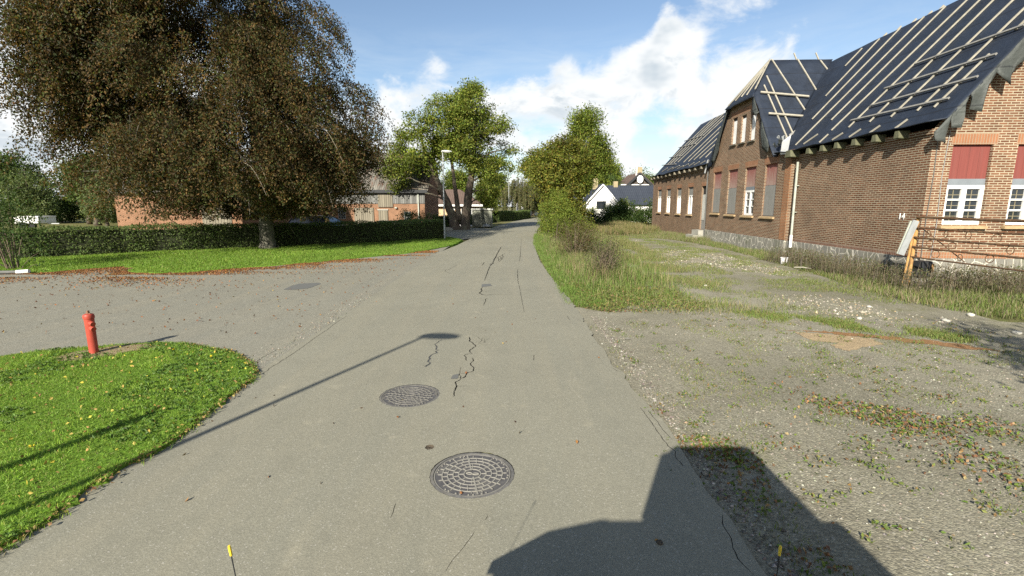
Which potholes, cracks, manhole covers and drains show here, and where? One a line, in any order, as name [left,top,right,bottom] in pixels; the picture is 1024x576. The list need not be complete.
crack [453,337,486,397]
manhole cover [379,385,440,407]
manhole cover [429,452,515,498]
crack [722,515,753,574]
crack [479,247,524,313]
